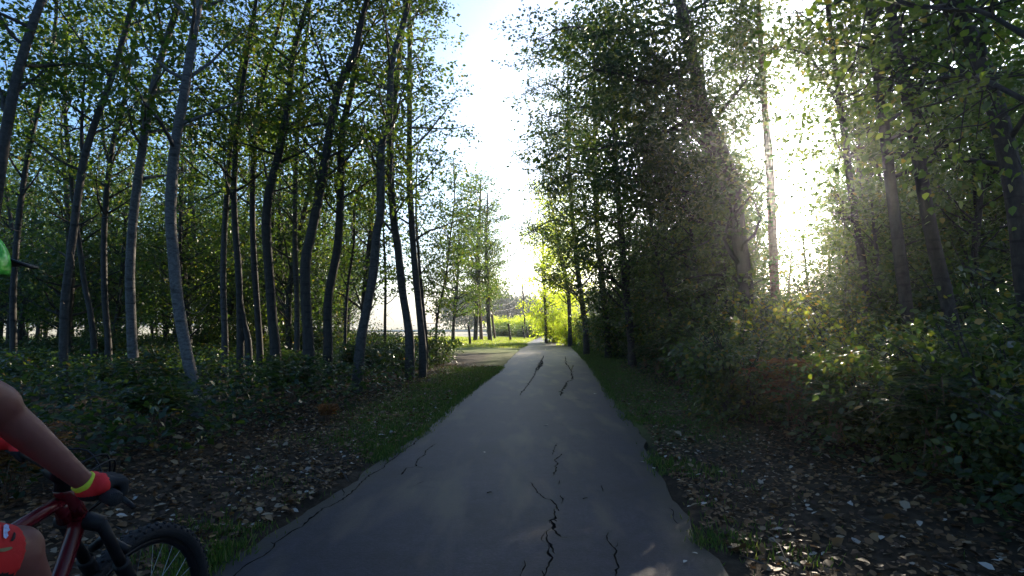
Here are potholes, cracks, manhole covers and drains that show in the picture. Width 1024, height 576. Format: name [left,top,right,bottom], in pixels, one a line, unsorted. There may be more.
crack [234,437,435,576]
crack [520,443,564,576]
crack [520,356,574,396]
crack [606,534,620,576]
